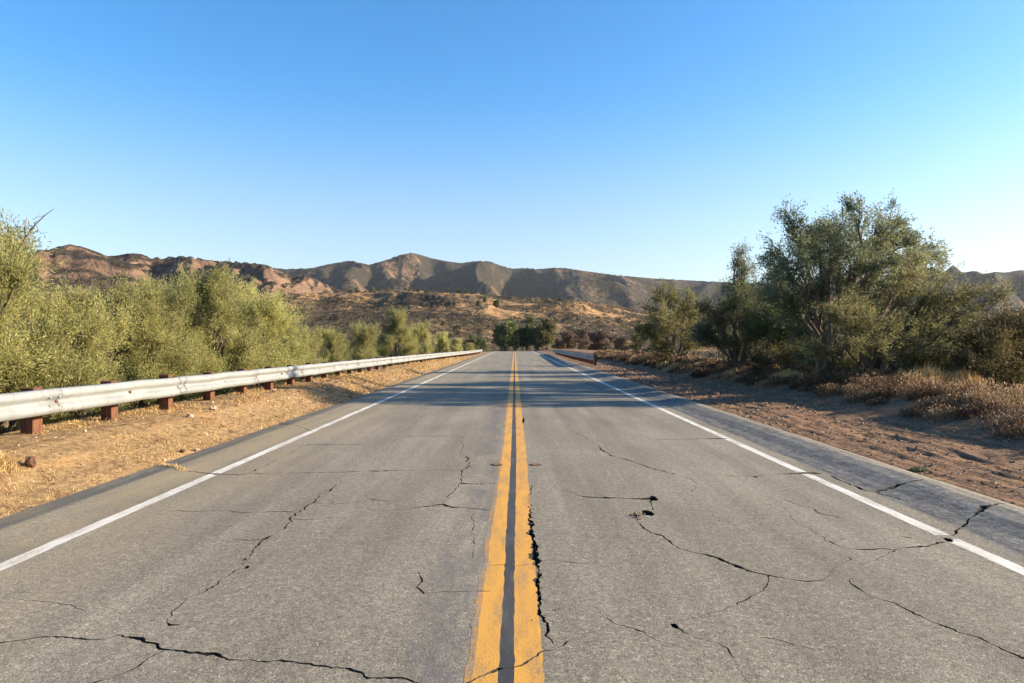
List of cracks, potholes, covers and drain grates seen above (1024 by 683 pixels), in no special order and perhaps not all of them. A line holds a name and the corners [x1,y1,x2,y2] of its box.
crack [0,418,632,683]
crack [587,438,698,492]
crack [563,489,1005,683]
